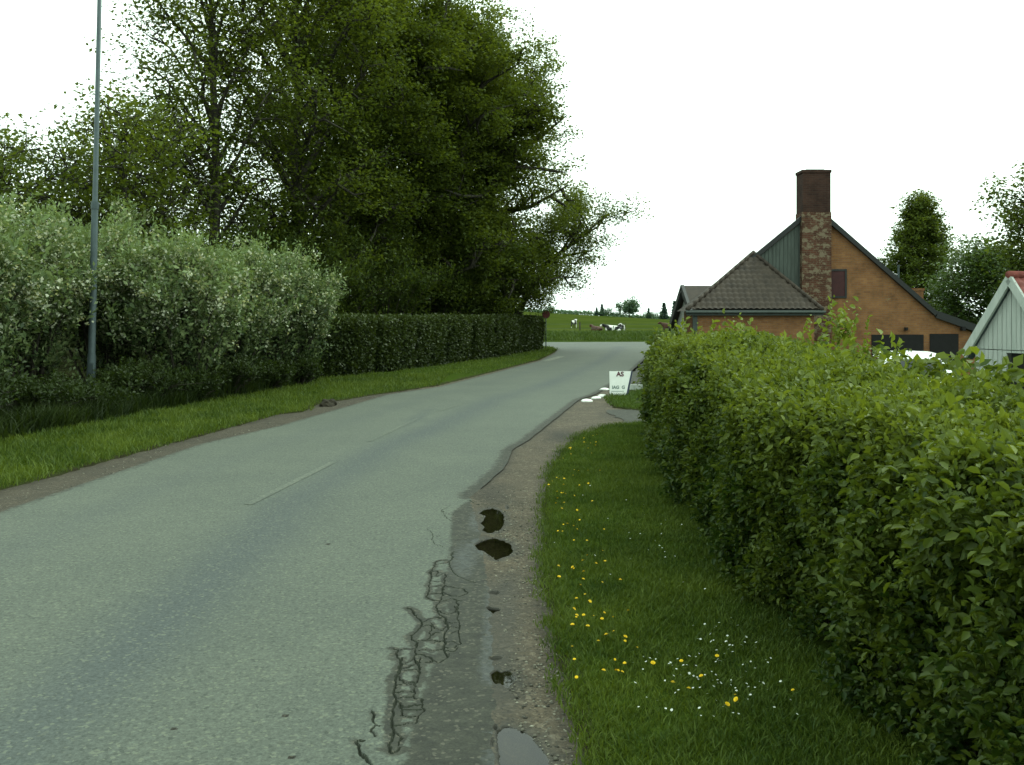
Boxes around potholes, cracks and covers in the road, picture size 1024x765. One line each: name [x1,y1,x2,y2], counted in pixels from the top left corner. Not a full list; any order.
pothole [489,668,517,688]
pothole [495,724,550,765]
pothole [478,508,505,533]
pothole [473,538,513,560]
crack [354,500,479,765]
